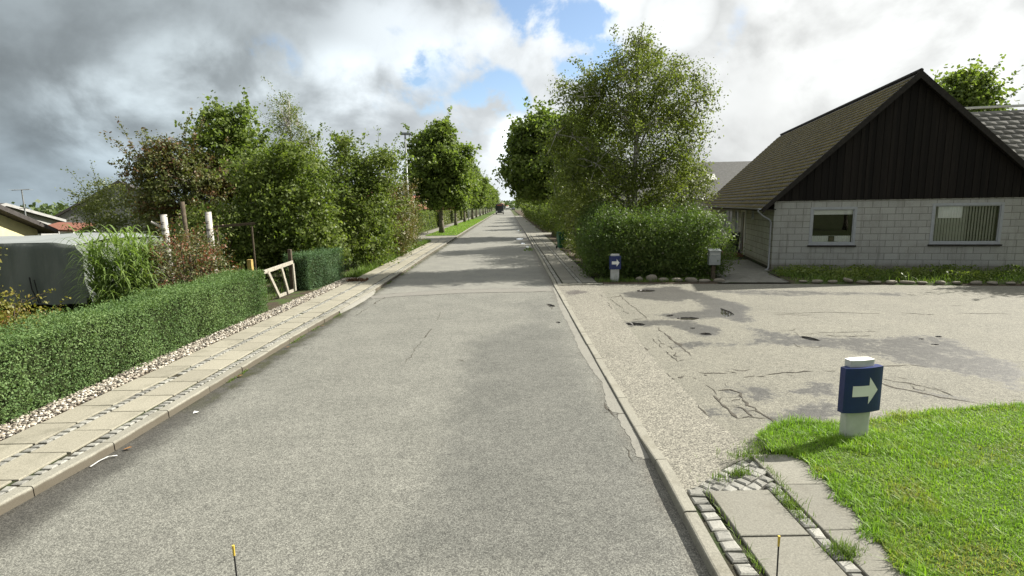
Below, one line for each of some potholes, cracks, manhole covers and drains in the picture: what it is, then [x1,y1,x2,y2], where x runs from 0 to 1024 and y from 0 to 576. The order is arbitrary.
crack [882,365,1000,406]
crack [600,292,804,423]
